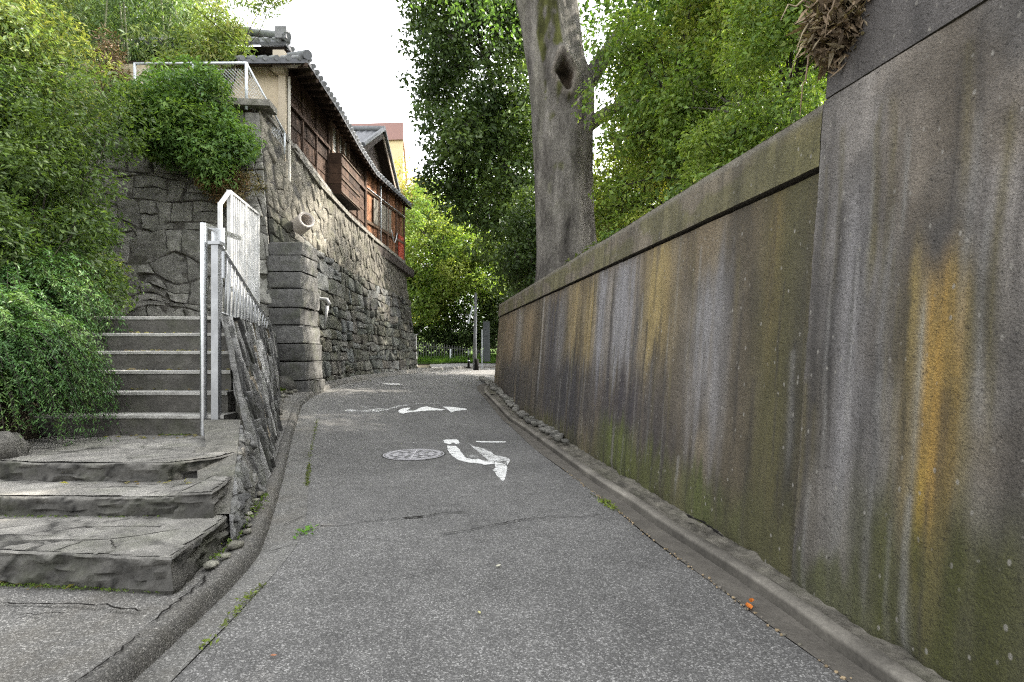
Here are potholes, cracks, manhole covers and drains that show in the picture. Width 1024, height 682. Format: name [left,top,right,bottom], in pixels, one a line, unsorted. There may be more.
crack [3,602,146,615]
manhole cover [381,449,446,461]
crack [283,511,598,534]
